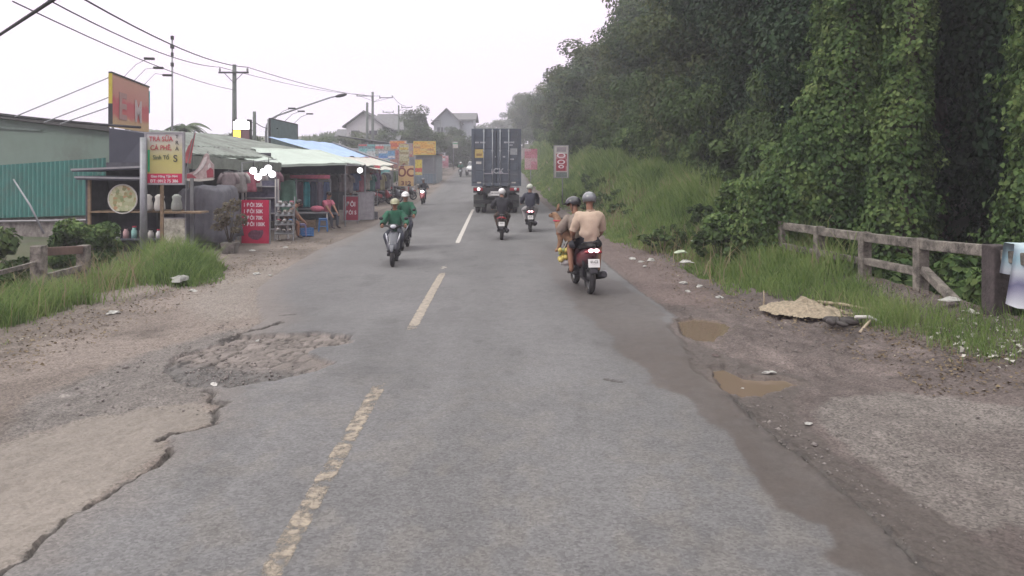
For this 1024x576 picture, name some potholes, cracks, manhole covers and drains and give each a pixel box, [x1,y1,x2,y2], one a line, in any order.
pothole [708,365,807,398]
pothole [164,331,353,388]
pothole [675,316,736,342]
crack [0,390,231,576]
